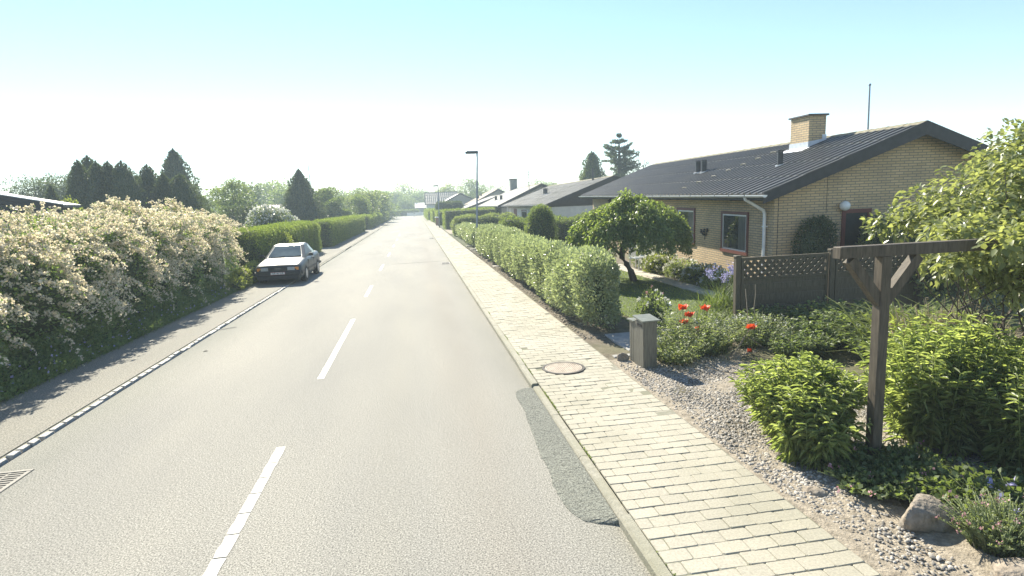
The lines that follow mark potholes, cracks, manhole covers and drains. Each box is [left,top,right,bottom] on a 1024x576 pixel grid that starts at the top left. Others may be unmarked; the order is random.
manhole cover [542,362,585,375]
drain grate [0,469,34,493]
